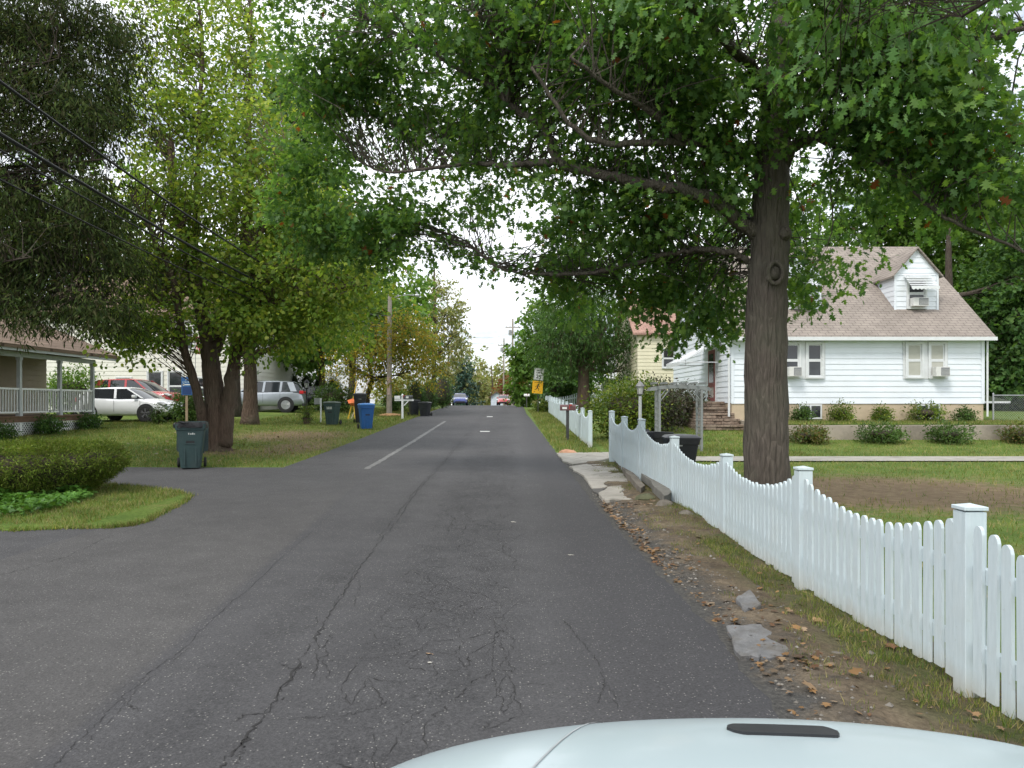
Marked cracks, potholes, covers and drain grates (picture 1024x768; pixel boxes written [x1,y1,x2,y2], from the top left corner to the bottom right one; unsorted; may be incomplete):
crack [219,434,657,768]
